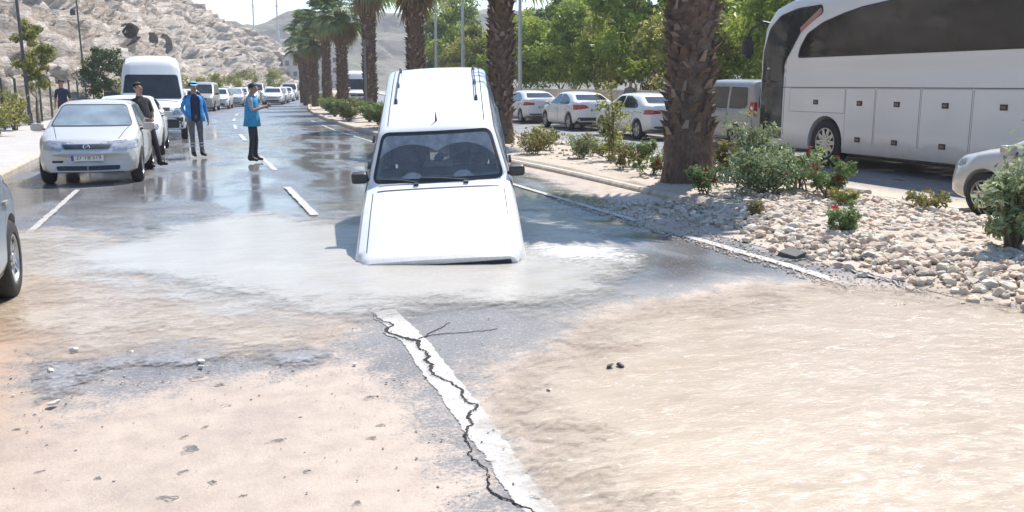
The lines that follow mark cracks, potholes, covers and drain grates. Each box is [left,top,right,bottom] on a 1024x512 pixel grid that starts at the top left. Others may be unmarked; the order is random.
crack [370,309,535,512]
